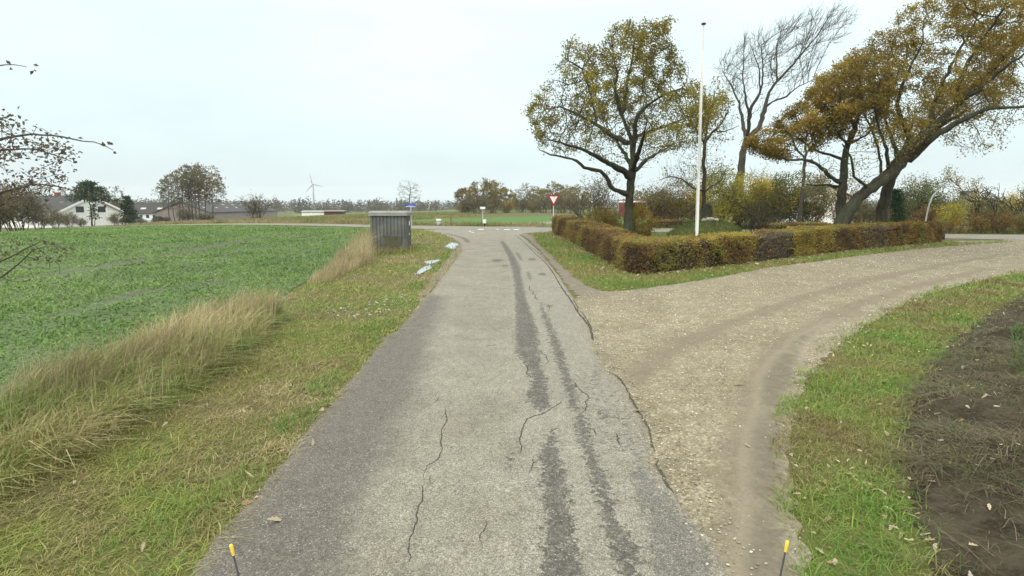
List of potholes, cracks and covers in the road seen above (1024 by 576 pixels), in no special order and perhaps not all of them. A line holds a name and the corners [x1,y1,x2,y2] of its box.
crack [408,397,448,560]
crack [519,402,561,472]
